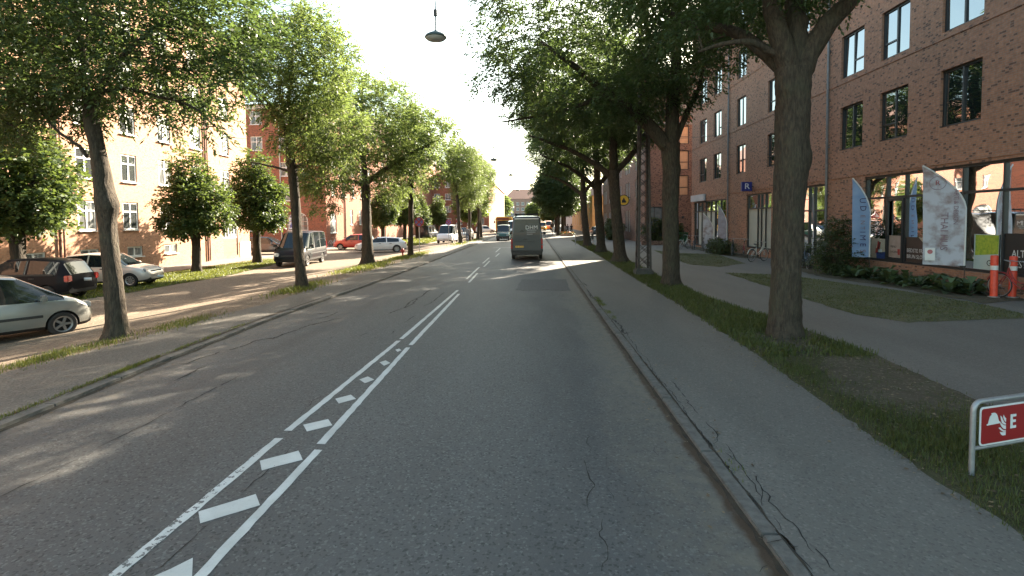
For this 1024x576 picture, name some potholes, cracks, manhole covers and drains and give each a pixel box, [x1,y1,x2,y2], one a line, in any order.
crack [582,282,833,570]
crack [2,312,340,496]
crack [390,289,443,332]
